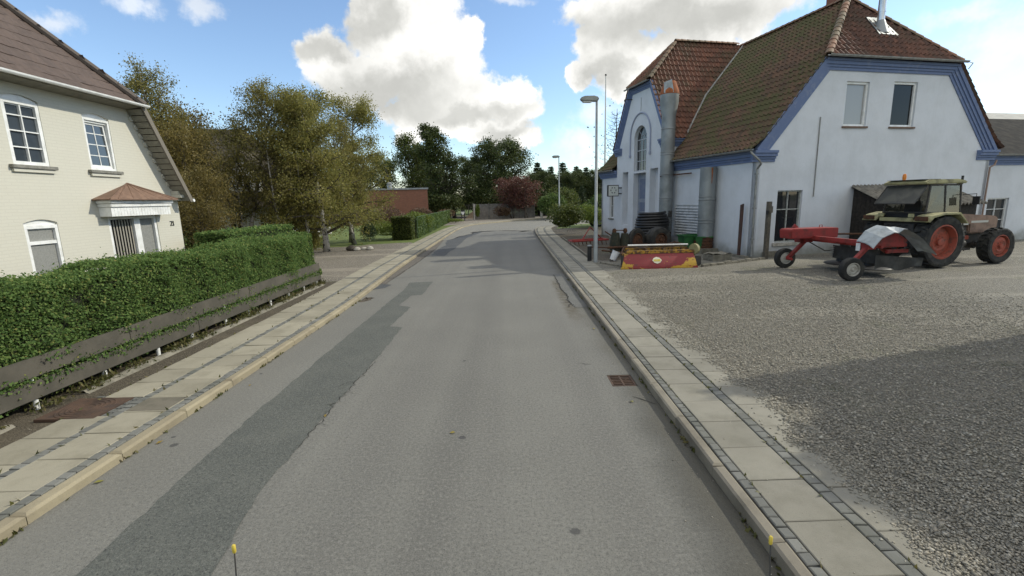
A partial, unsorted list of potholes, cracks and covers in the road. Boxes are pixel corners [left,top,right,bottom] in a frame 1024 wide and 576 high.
drain grate [607,375,637,387]
manhole cover [33,397,133,423]
crack [293,356,382,453]
